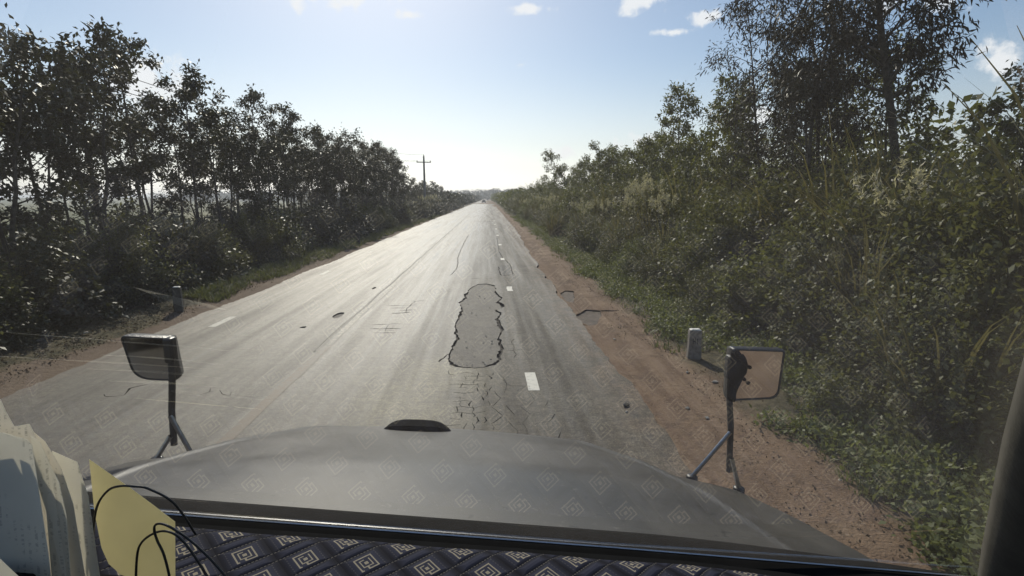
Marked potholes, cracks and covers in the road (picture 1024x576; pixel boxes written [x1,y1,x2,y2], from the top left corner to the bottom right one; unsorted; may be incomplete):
pothole [576,309,619,326]
pothole [560,291,575,303]
crack [447,371,561,438]
pothole [448,284,505,368]
